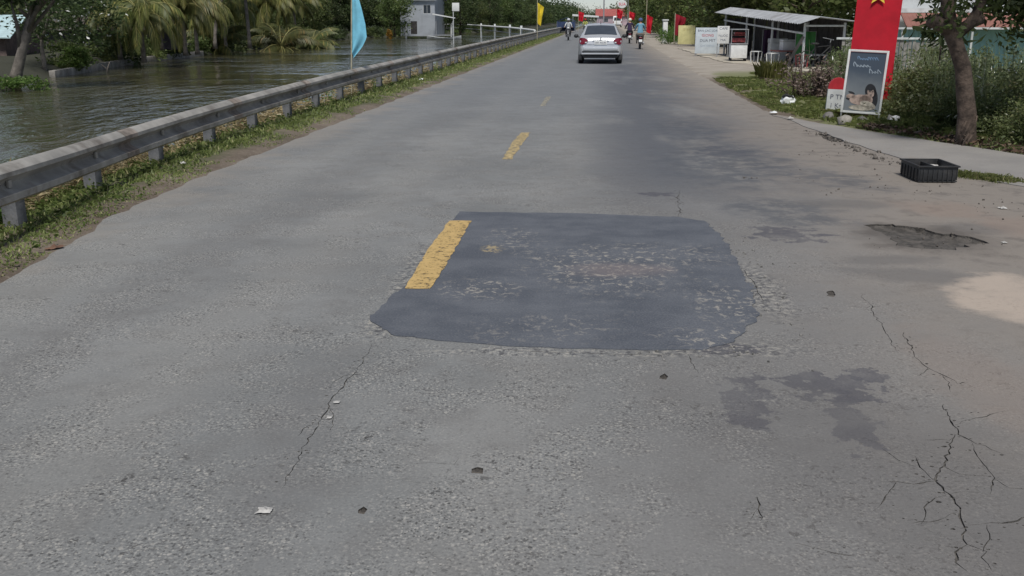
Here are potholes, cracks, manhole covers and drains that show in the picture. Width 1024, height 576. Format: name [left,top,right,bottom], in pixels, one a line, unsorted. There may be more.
crack [862,294,1024,573]
crack [275,345,375,487]
pothole [865,224,988,250]
